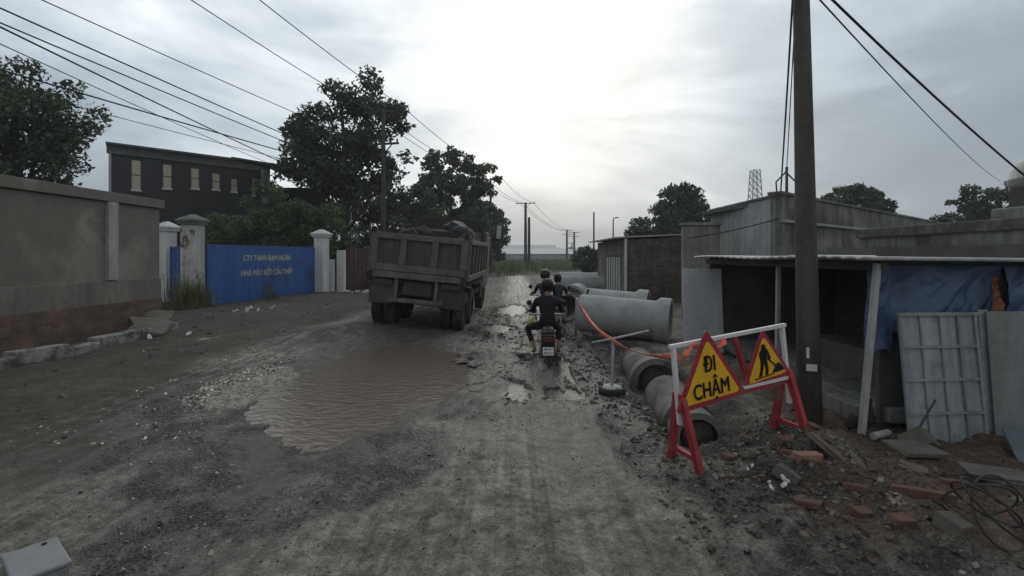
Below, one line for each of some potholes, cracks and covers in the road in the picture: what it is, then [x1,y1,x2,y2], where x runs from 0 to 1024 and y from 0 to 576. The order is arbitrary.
pothole [170,332,519,519]
pothole [492,303,530,319]
pothole [468,323,522,335]
pothole [537,383,595,402]
